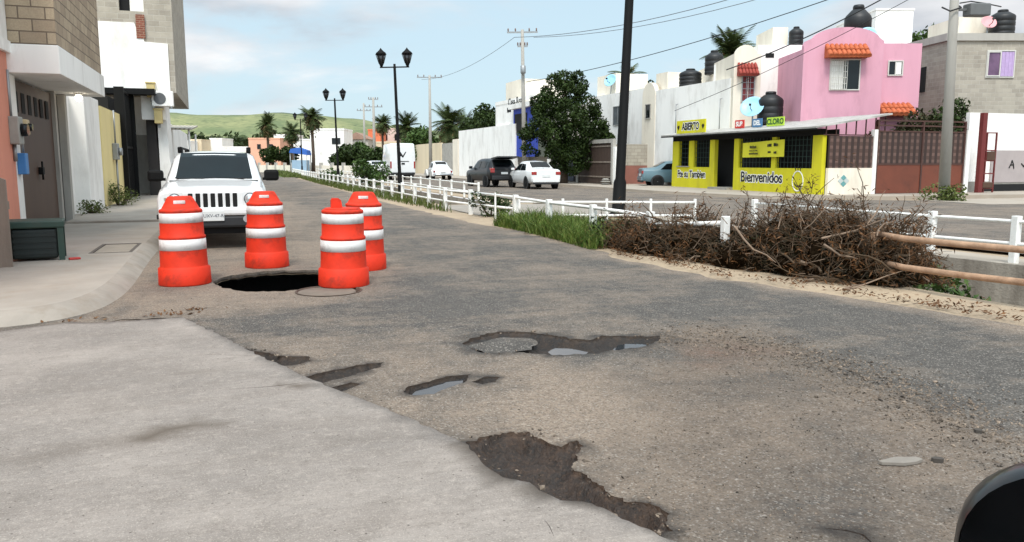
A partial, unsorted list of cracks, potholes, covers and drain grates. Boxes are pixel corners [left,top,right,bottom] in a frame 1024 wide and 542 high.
pothole [462,331,660,355]
manhole cover [88,243,141,254]
pothole [466,432,673,534]
pothole [247,349,310,366]
pothole [404,374,471,395]
pothole [331,382,359,391]
manhole cover [295,286,363,297]
pothole [473,376,500,384]
pothole [307,362,383,383]
